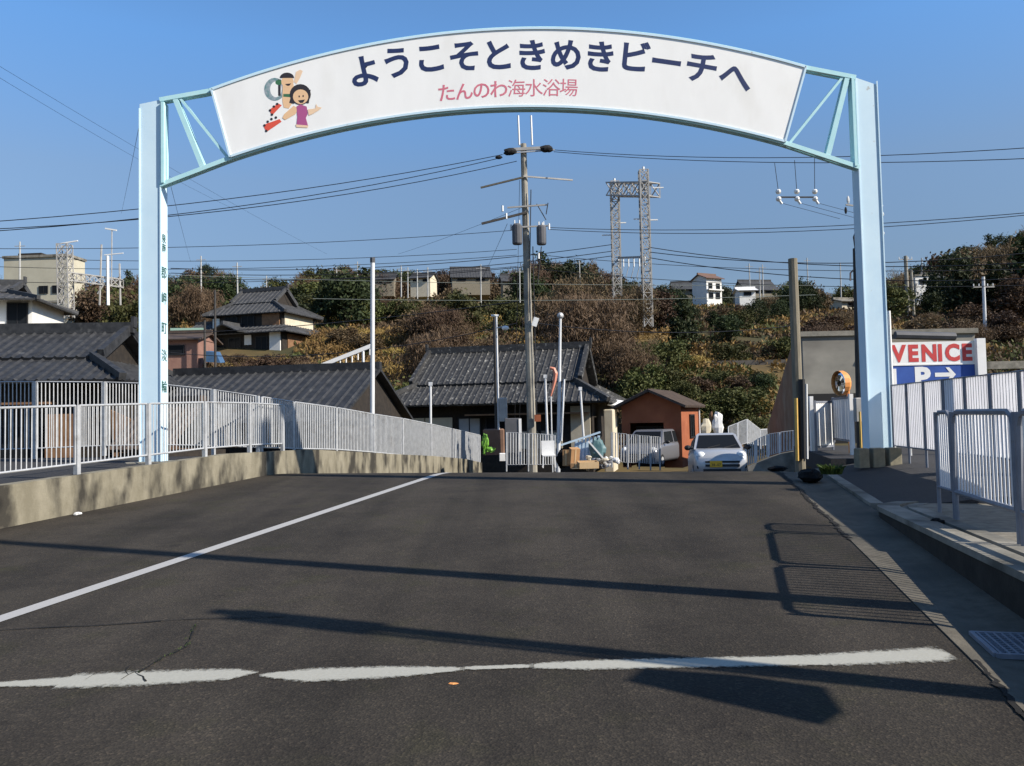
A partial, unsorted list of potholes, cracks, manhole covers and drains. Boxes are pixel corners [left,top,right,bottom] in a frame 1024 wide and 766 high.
drain grate [969,631,1024,660]
crack [1,616,282,681]
